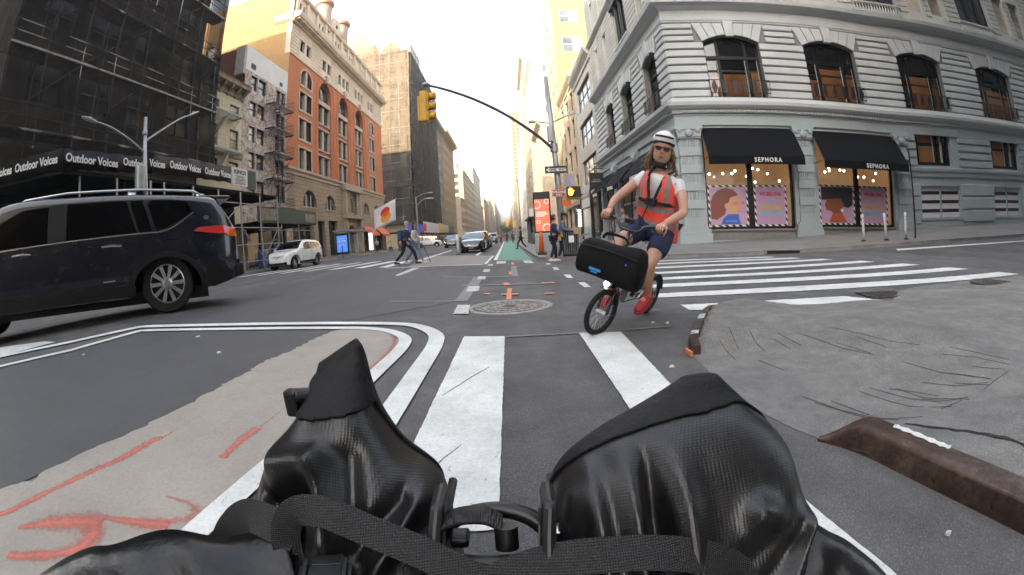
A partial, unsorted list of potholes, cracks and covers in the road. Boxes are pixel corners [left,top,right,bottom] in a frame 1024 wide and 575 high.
crack [722,327,1008,420]
manhole cover [469,299,553,315]
